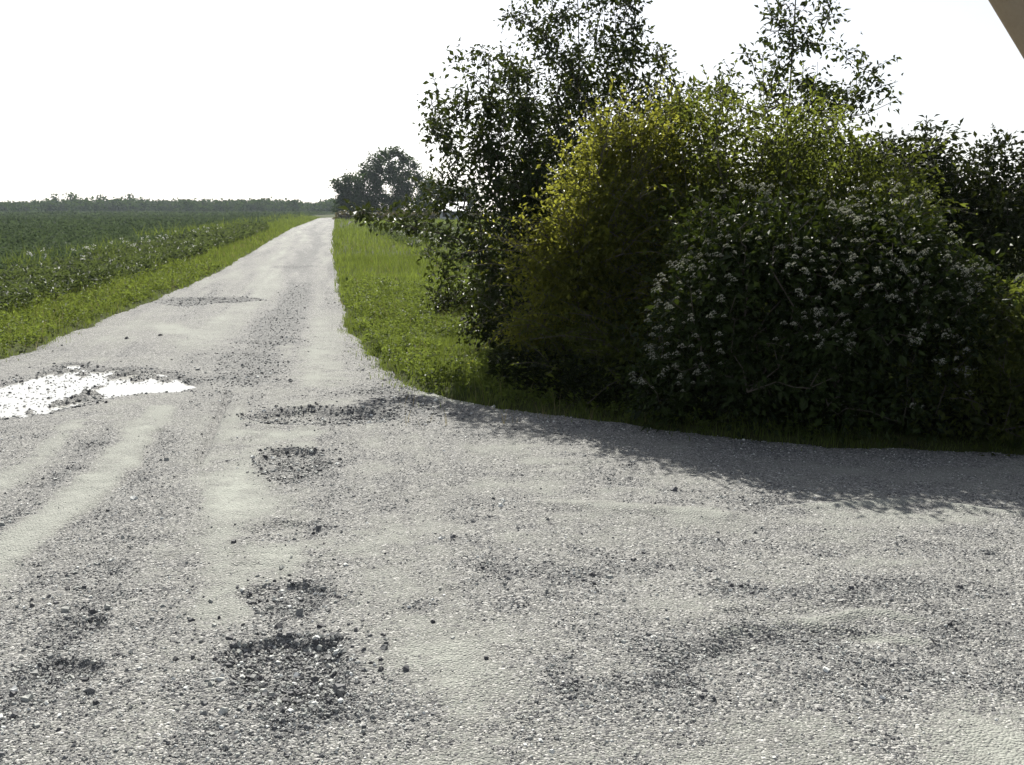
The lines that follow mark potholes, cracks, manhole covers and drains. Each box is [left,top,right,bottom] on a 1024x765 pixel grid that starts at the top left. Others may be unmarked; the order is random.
pothole [228,581,334,613]
pothole [23,656,108,681]
pothole [210,635,354,707]
pothole [251,447,329,483]
pothole [0,362,205,420]
pothole [240,405,405,426]
pothole [157,296,260,306]
